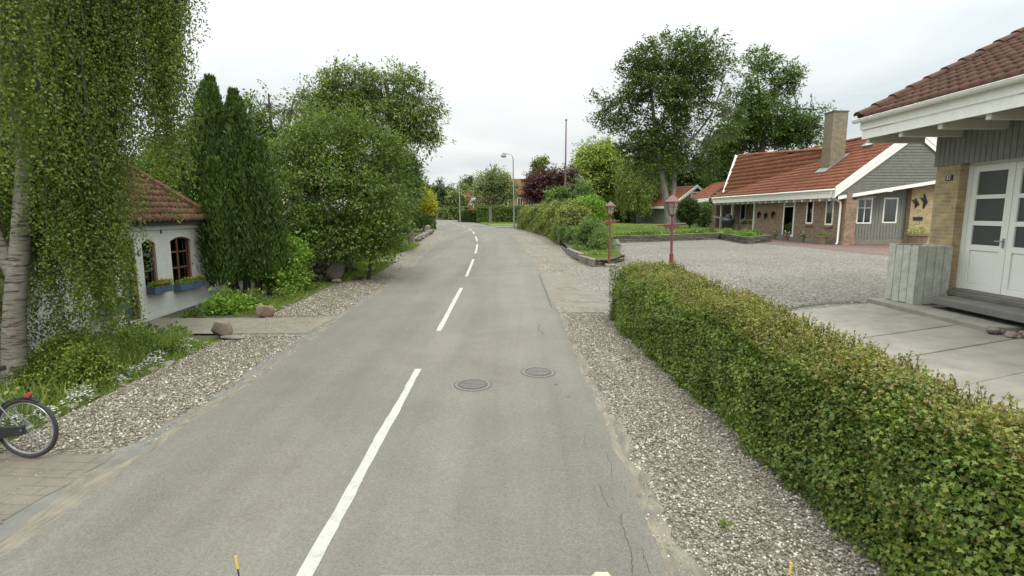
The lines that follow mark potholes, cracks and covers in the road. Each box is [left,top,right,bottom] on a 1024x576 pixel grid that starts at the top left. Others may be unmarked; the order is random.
manhole cover [454,378,492,391]
manhole cover [521,367,555,378]
crack [600,452,652,575]
